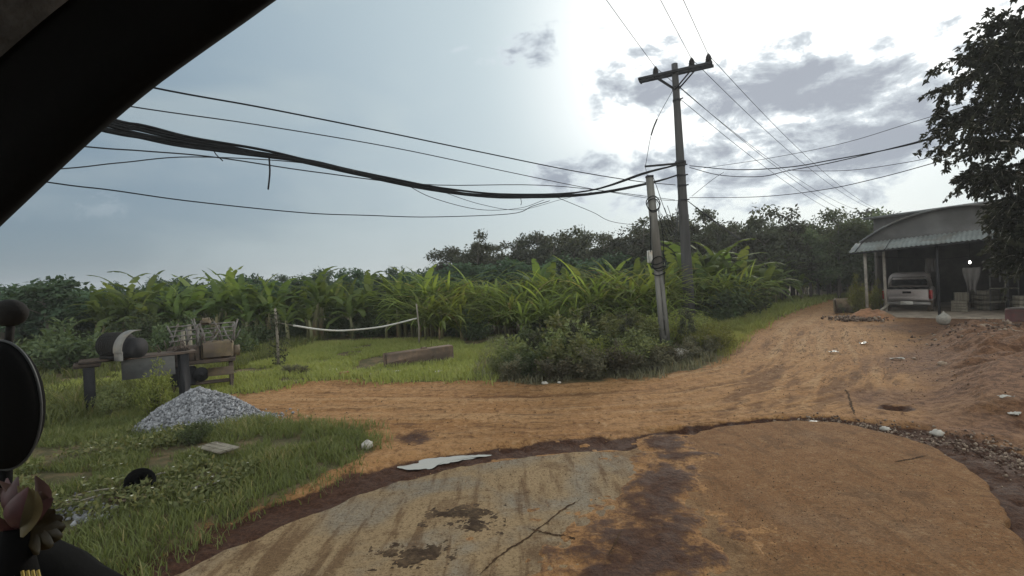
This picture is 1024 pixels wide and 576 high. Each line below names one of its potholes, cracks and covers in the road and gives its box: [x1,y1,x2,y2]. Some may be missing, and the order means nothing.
crack [481,499,580,573]
